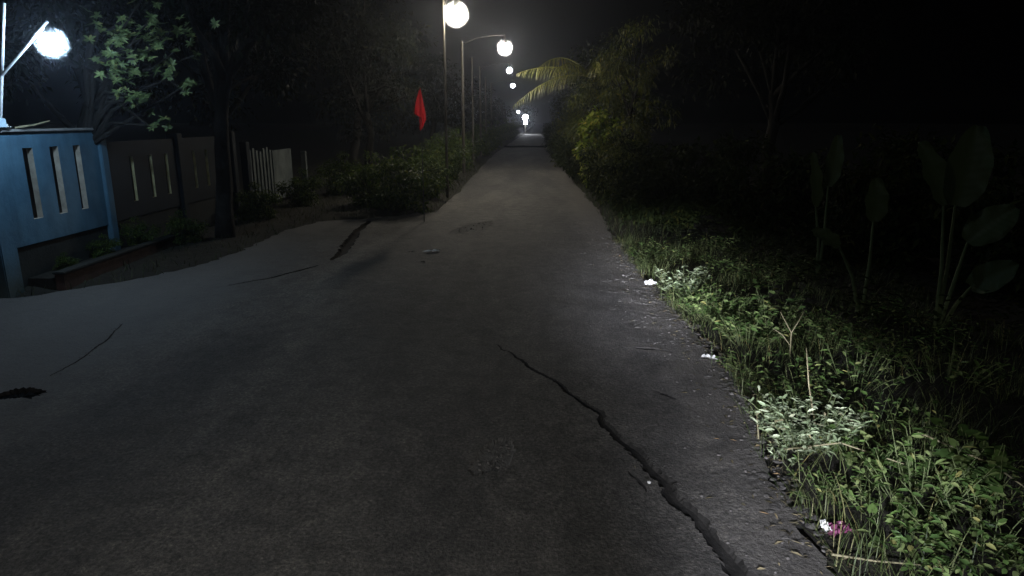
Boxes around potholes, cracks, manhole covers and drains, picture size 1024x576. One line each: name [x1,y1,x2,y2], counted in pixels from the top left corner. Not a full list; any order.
crack [50,221,371,376]
crack [496,344,757,576]
pothole [0,387,47,399]
